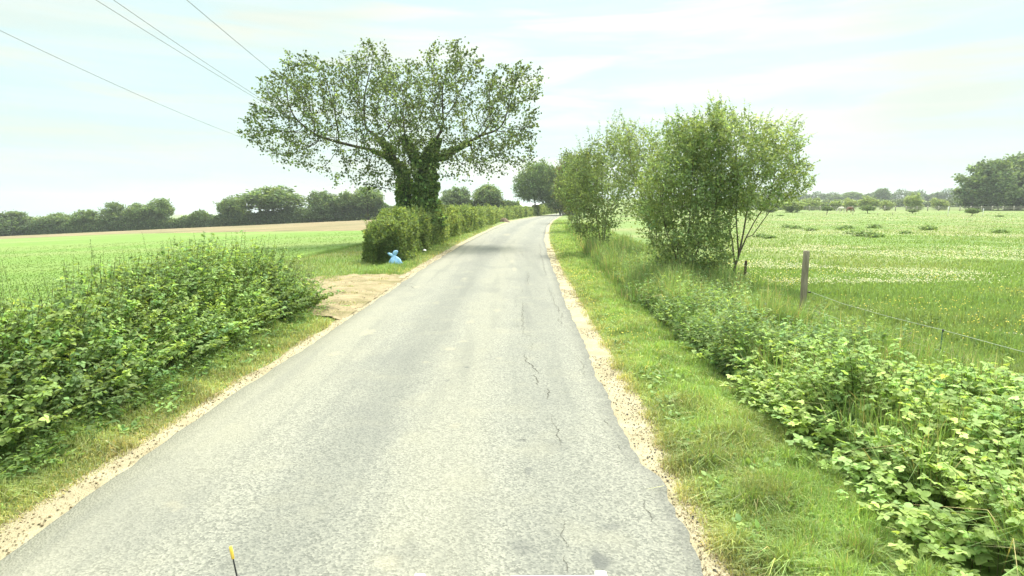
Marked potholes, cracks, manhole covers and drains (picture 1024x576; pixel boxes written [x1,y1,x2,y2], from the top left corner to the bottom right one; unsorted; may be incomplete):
crack [516,241,550,397]
